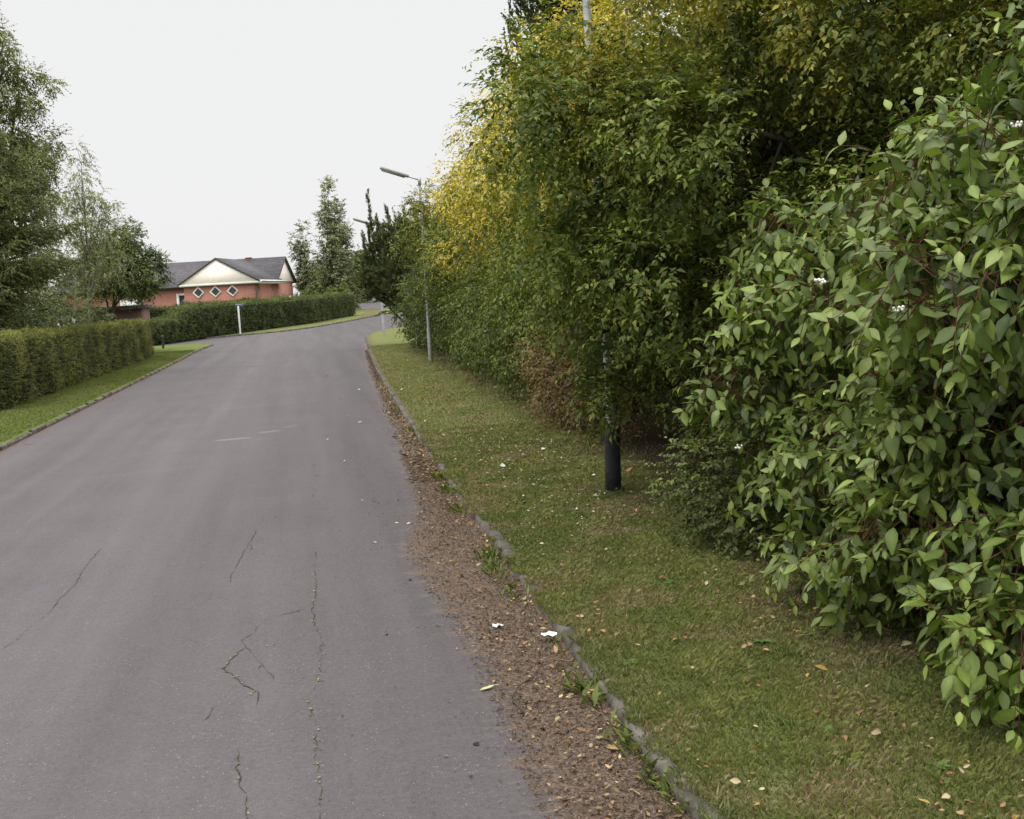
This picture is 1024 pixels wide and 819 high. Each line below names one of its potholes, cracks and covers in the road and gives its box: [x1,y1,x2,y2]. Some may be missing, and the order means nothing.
crack [221,550,325,819]
